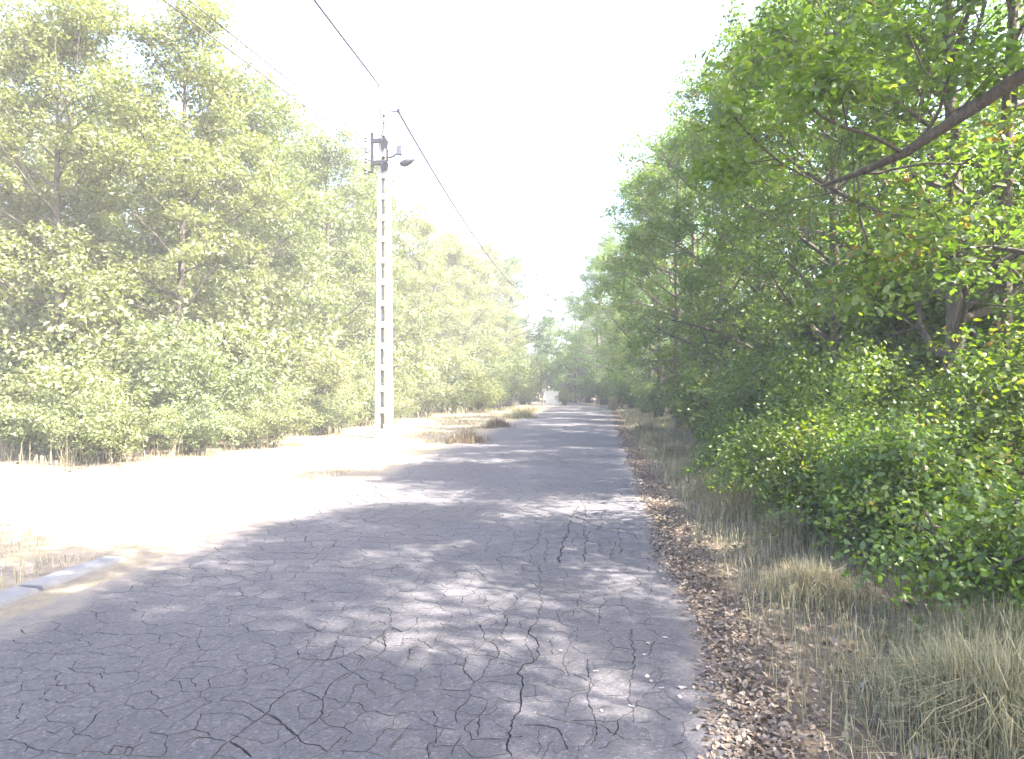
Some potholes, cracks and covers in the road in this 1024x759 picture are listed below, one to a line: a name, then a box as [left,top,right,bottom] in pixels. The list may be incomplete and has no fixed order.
crack [0,453,650,759]
